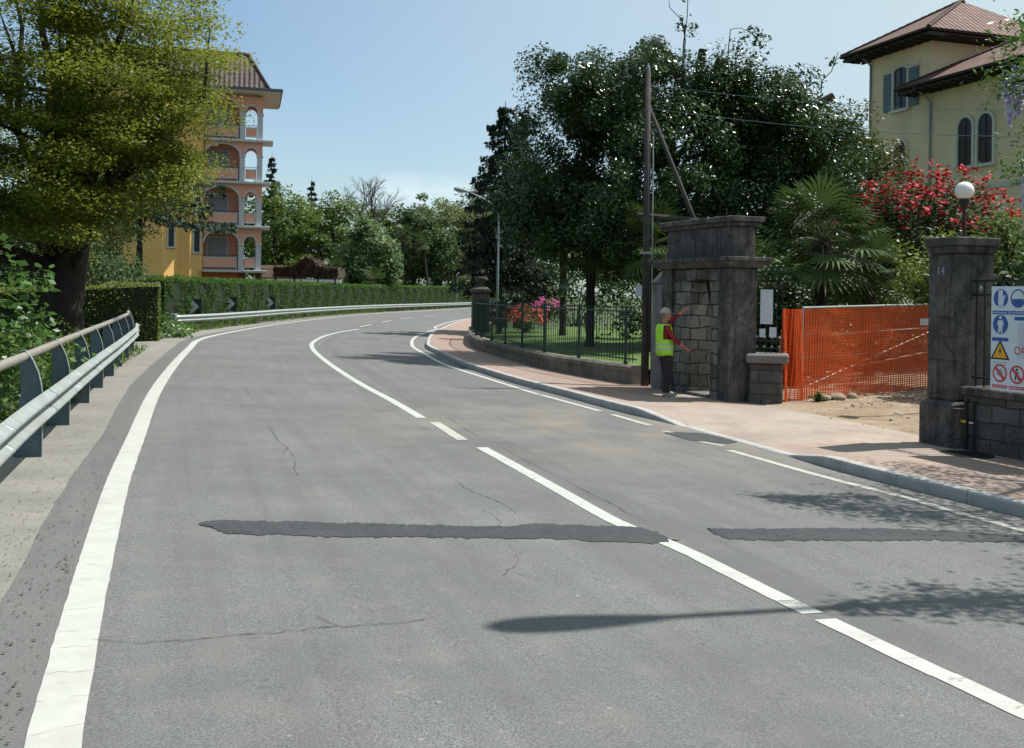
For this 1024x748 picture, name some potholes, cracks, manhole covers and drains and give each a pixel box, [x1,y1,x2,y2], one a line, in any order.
crack [81,591,433,643]
